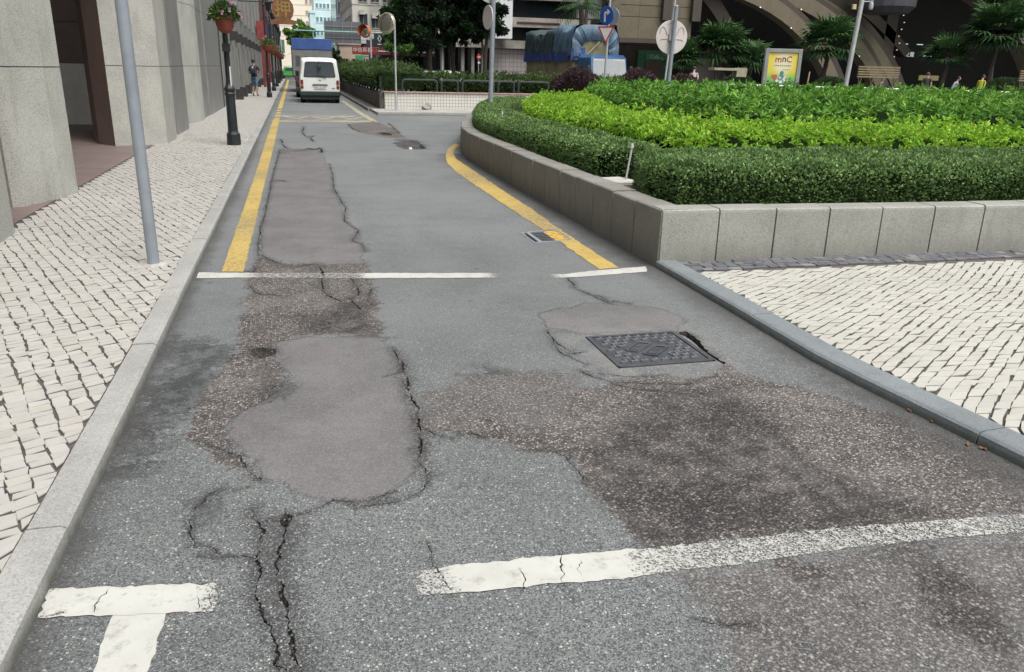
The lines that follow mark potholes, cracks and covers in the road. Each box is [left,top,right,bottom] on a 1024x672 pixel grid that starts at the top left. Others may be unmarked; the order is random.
pothole [393,140,425,149]
pothole [251,348,276,358]
manhole cover [587,331,714,368]
pothole [679,331,726,364]
crack [247,129,372,317]
crack [188,491,315,672]
drain grate [521,229,571,243]
crack [299,349,586,515]
